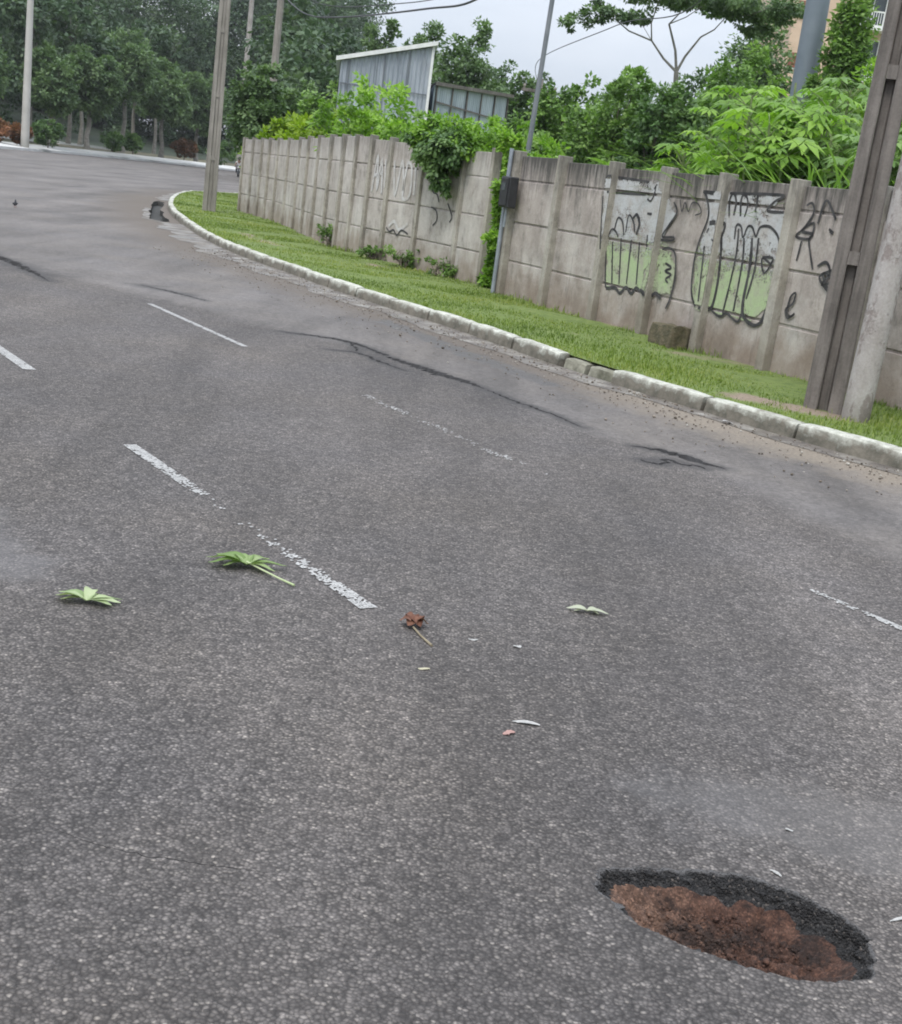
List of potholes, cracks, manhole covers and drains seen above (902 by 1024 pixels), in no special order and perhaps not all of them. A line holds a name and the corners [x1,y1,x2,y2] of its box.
crack [280,331,581,427]
crack [0,256,48,281]
crack [634,446,725,469]
crack [55,828,268,873]
pothole [592,866,878,983]
